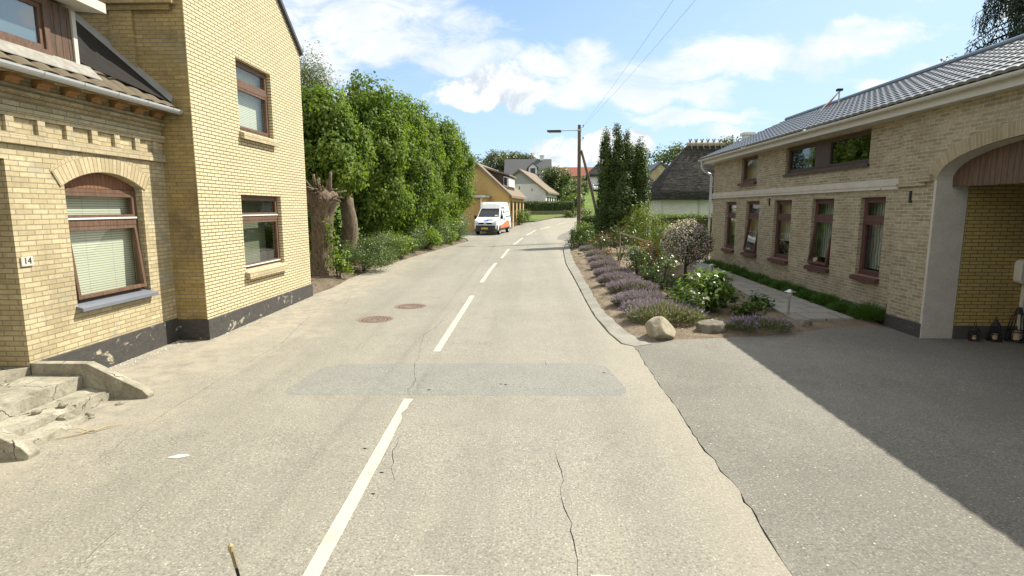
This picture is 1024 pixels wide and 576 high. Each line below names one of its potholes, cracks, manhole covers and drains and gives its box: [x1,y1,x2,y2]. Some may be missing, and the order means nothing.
crack [554,450,578,576]
